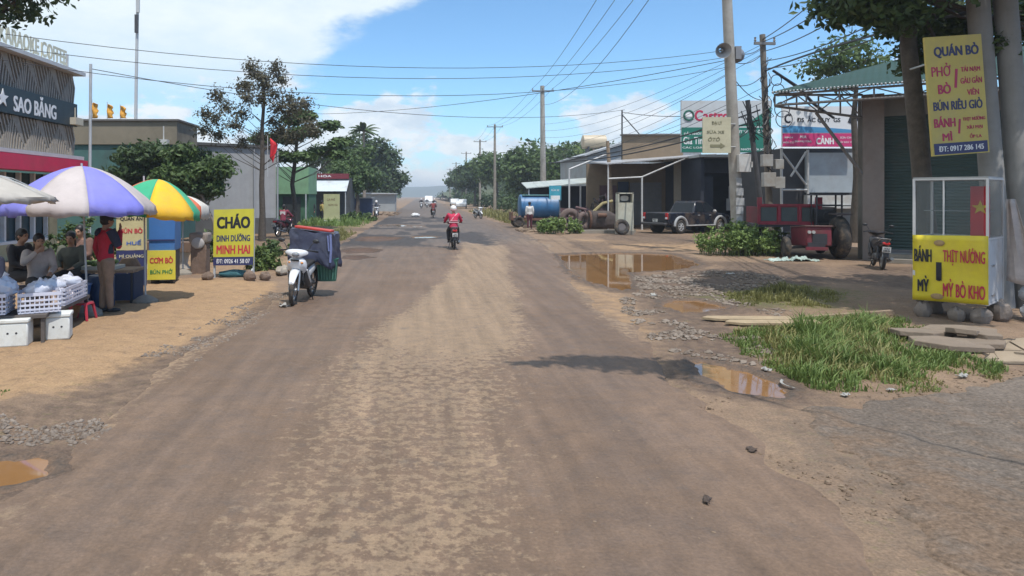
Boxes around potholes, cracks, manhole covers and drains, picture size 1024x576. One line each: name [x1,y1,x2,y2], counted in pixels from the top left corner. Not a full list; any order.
pothole [0,451,75,494]
pothole [553,252,710,292]
pothole [673,356,806,403]
pothole [651,297,738,314]
